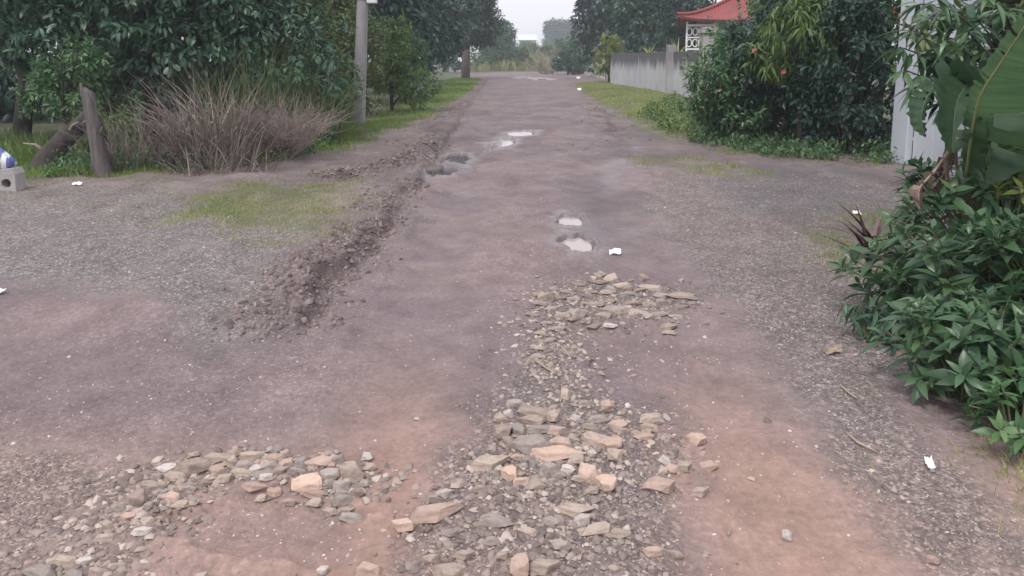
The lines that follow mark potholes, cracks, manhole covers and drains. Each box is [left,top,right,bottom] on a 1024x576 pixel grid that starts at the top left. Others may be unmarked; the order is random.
pothole [423,166,461,178]
pothole [432,153,474,166]
pothole [485,137,518,151]
pothole [554,231,600,253]
pothole [554,212,585,226]
